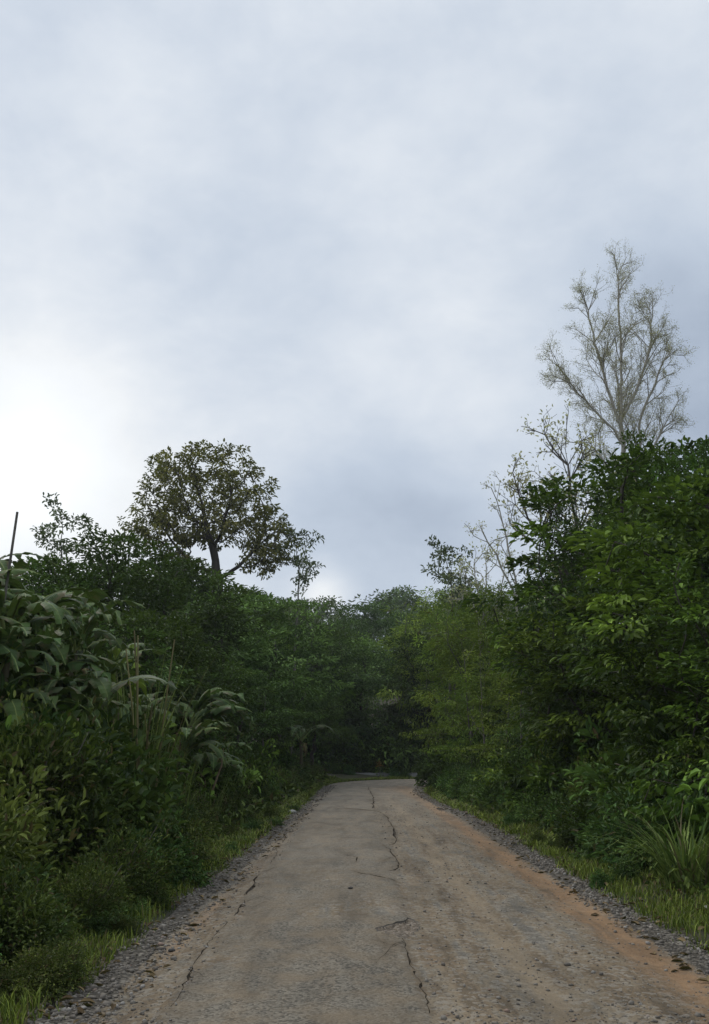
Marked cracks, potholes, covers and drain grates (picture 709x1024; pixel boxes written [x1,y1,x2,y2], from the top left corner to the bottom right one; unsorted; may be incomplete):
crack [338,787,400,881]
crack [376,938,430,1013]
crack [170,851,278,1007]
